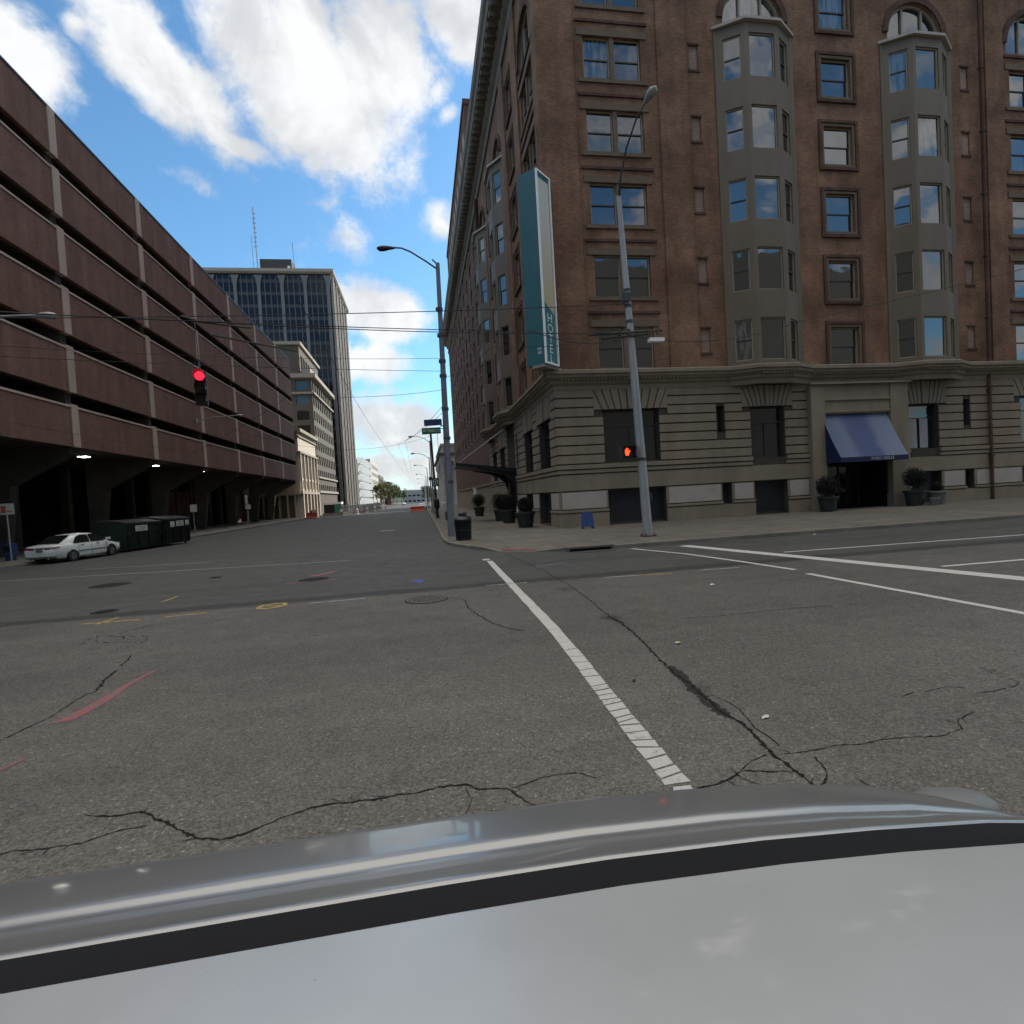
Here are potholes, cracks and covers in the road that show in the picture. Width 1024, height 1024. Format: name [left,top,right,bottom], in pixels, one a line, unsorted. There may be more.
drain grate [563,543,615,553]
crack [776,712,974,755]
crack [901,667,1019,697]
crack [0,625,153,741]
crack [452,597,523,631]
crack [0,754,791,856]
manhole cover [405,595,448,604]
